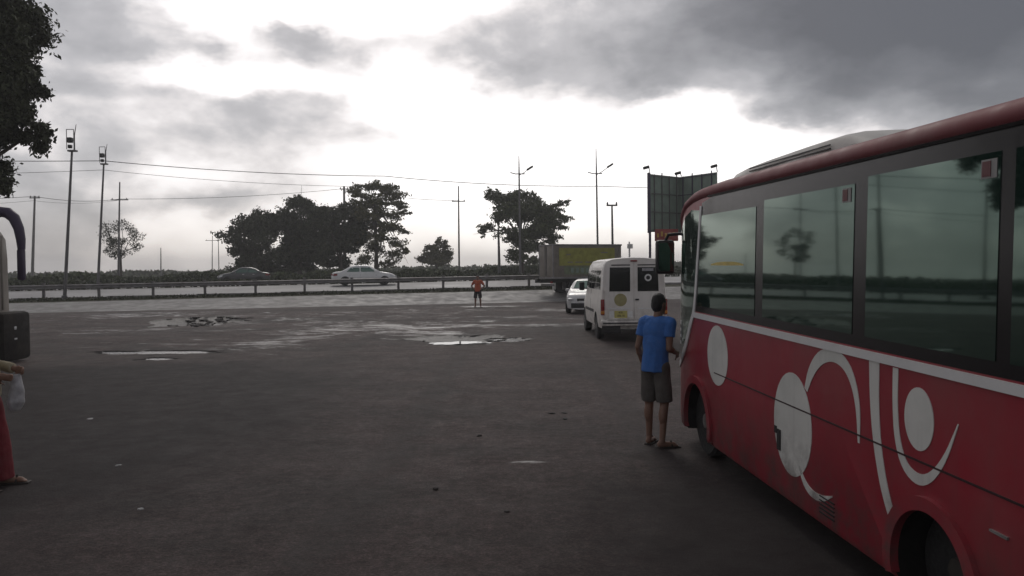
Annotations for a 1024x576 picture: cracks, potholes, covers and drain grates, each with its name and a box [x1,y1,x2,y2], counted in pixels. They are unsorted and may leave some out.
pothole [148,316,253,328]
pothole [403,334,507,346]
